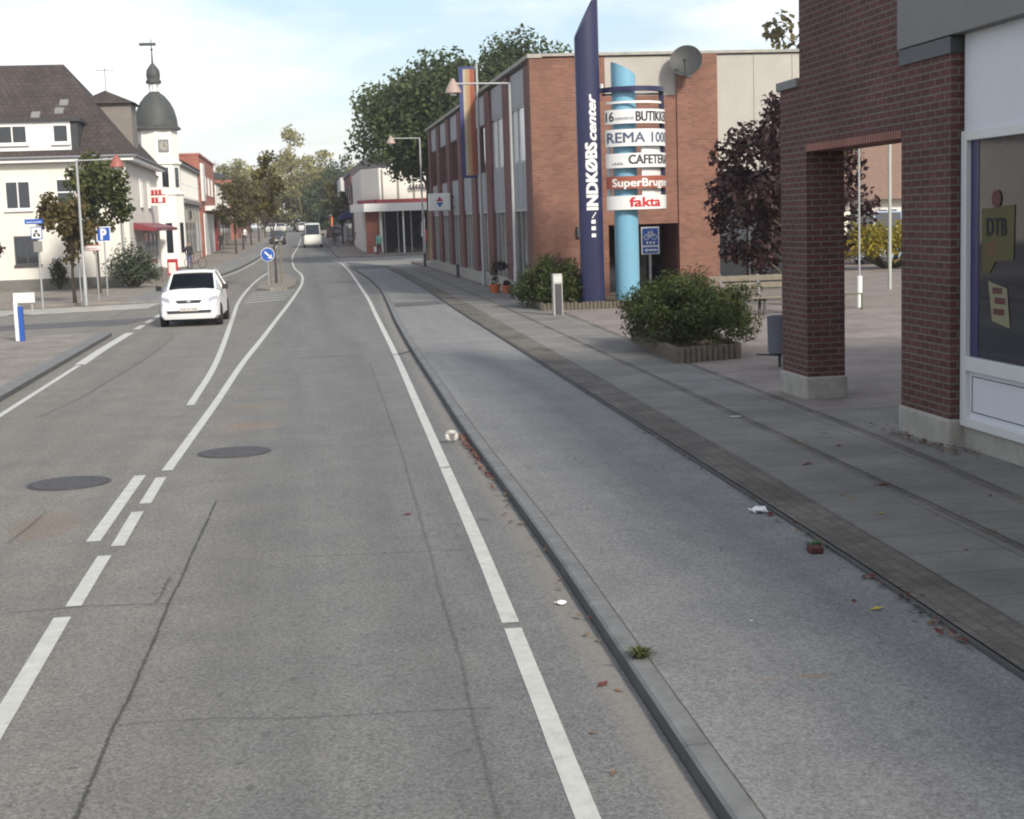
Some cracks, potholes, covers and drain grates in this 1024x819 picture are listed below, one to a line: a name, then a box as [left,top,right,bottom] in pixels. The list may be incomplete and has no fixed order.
manhole cover [197,446,272,458]
manhole cover [26,476,111,491]
